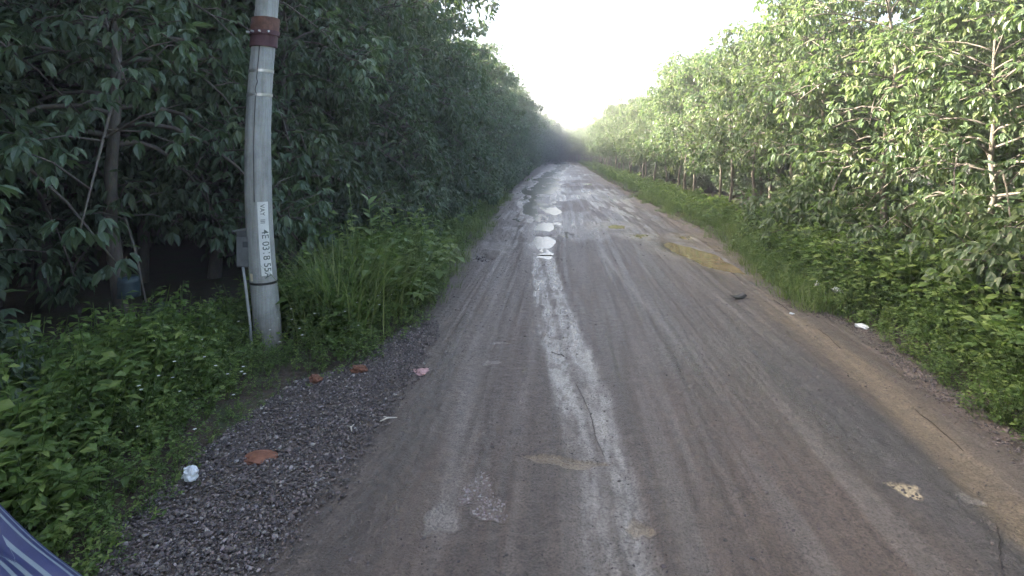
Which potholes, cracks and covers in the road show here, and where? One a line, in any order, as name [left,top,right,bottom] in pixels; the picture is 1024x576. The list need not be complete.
pothole [529,252,559,260]
